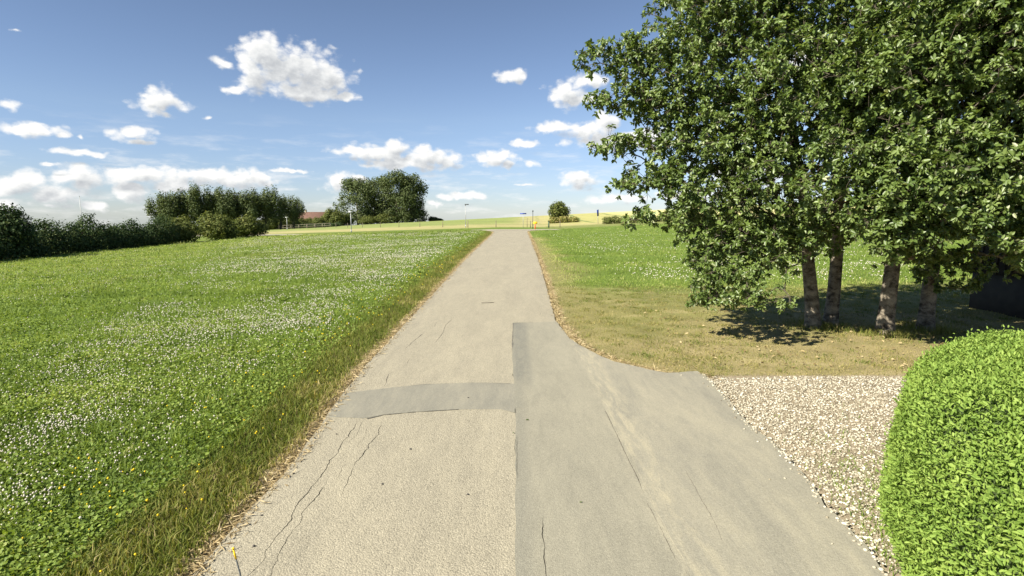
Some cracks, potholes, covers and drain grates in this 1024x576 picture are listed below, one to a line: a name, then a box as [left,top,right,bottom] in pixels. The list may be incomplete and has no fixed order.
crack [247,422,381,576]
